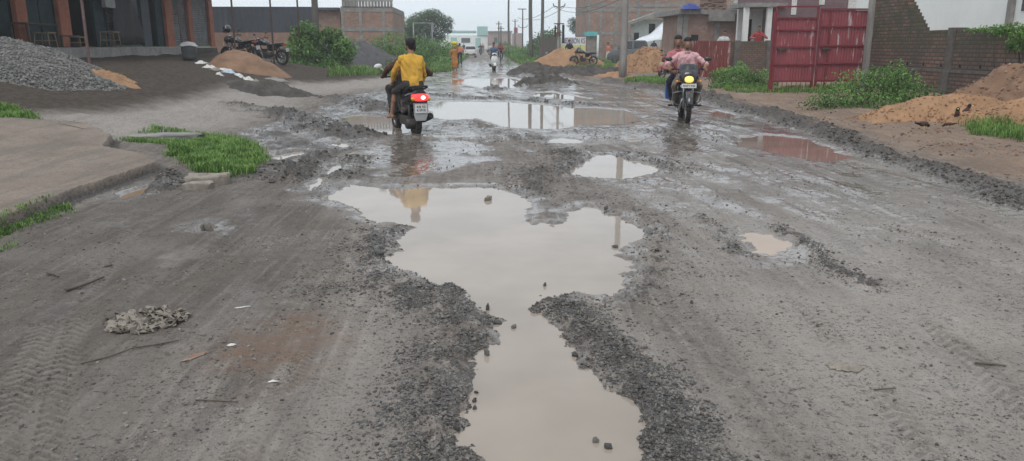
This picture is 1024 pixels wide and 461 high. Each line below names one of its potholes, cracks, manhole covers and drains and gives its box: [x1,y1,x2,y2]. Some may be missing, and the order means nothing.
pothole [558,152,665,180]
pothole [435,298,671,461]
pothole [543,135,592,144]
pothole [734,133,866,163]
pothole [719,222,813,261]
pothole [428,101,645,129]
pothole [314,182,537,227]
pothole [336,112,423,135]
pothole [369,203,660,322]
